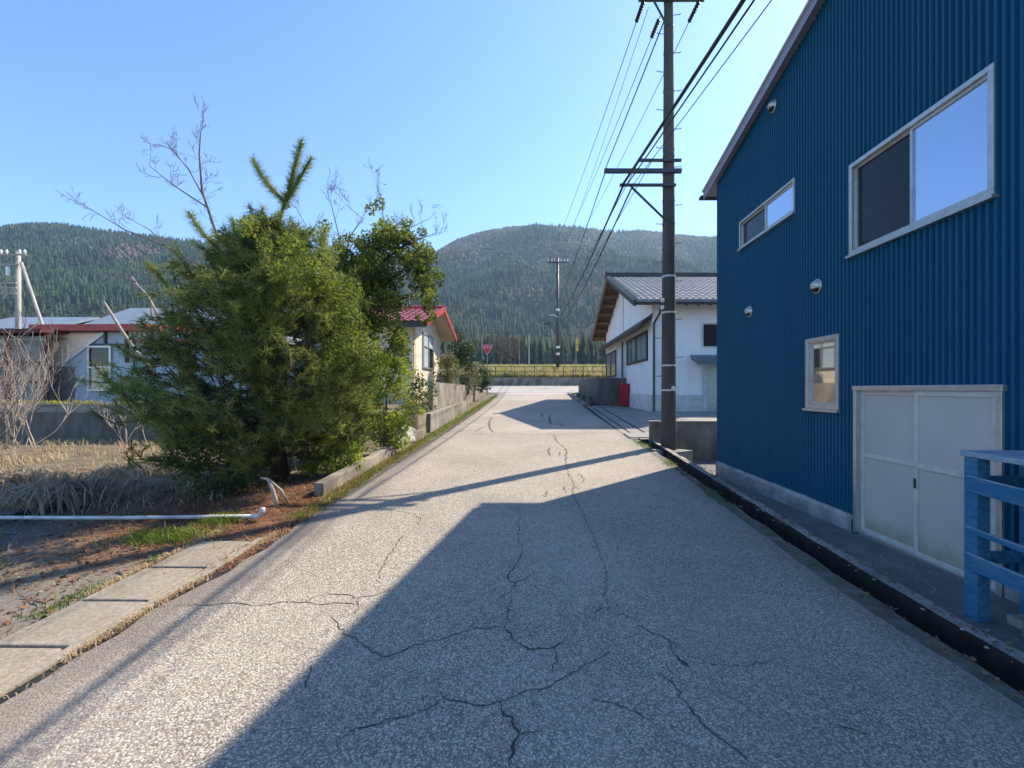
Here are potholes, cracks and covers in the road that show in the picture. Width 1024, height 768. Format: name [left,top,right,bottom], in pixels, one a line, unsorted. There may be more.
crack [541,413,770,760]
crack [180,511,610,767]
